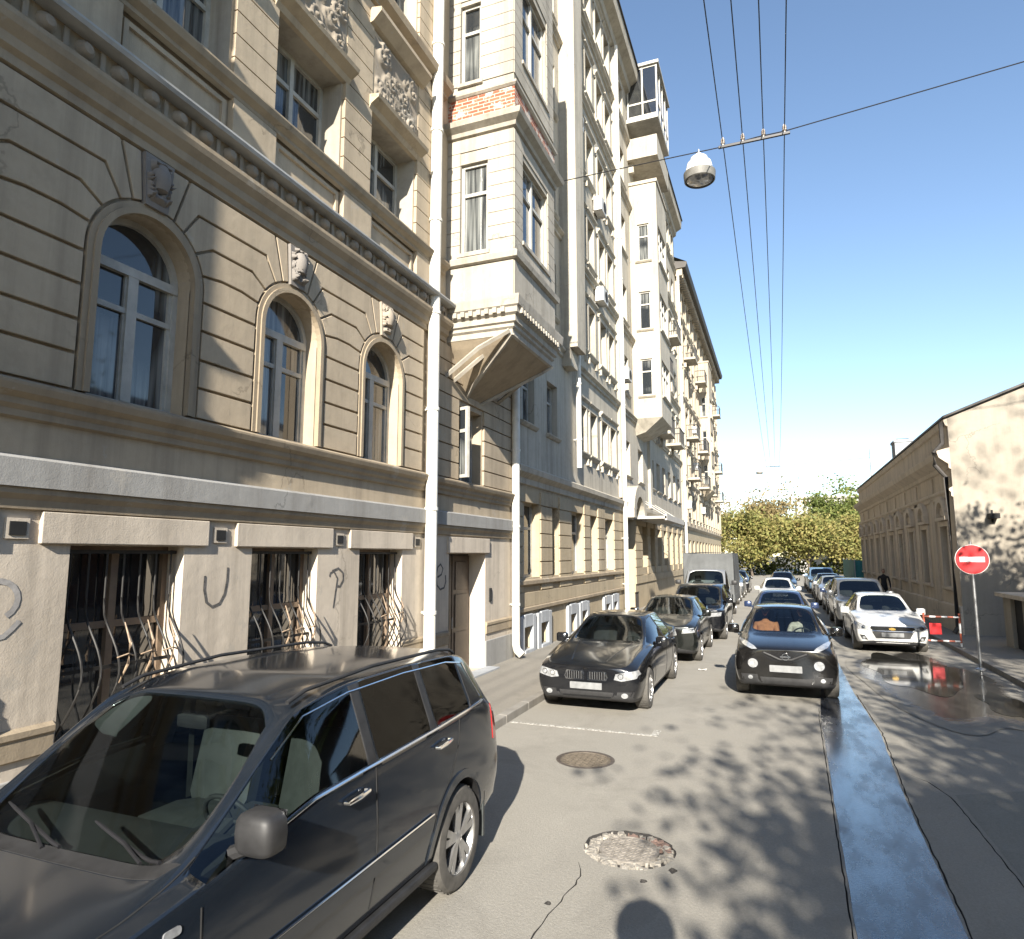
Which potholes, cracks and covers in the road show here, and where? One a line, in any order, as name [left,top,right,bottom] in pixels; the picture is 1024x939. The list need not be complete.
manhole cover [556,751,615,769]
crack [530,865,581,939]
manhole cover [584,830,676,870]
